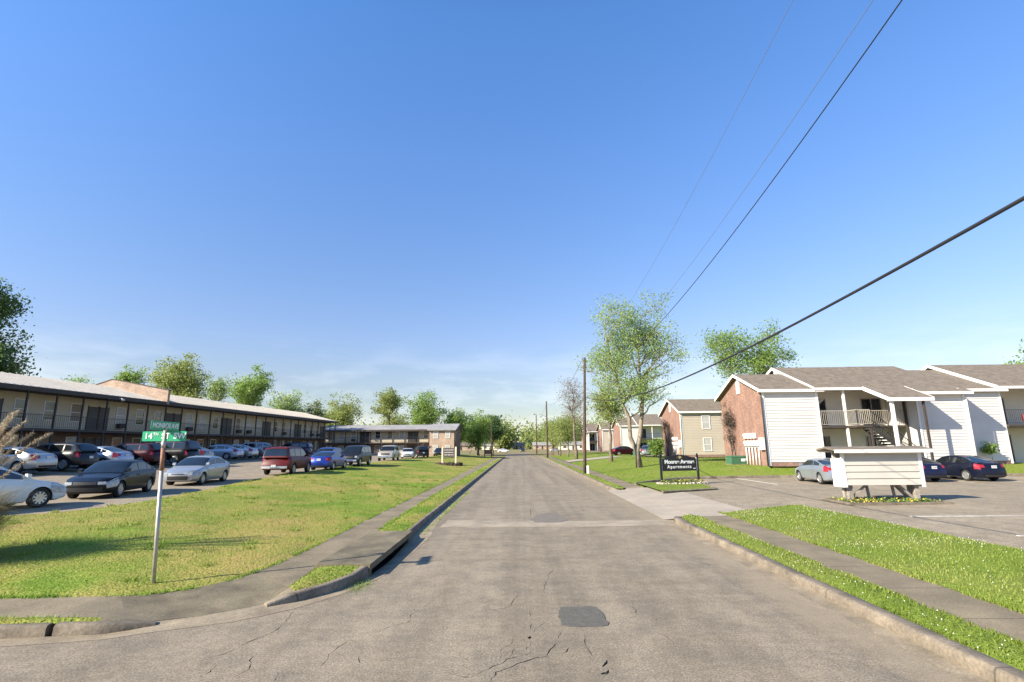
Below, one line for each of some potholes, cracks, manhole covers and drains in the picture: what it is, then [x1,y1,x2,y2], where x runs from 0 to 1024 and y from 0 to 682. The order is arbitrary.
drain grate [314,531,412,577]
crack [201,613,292,677]
crack [457,596,592,679]
